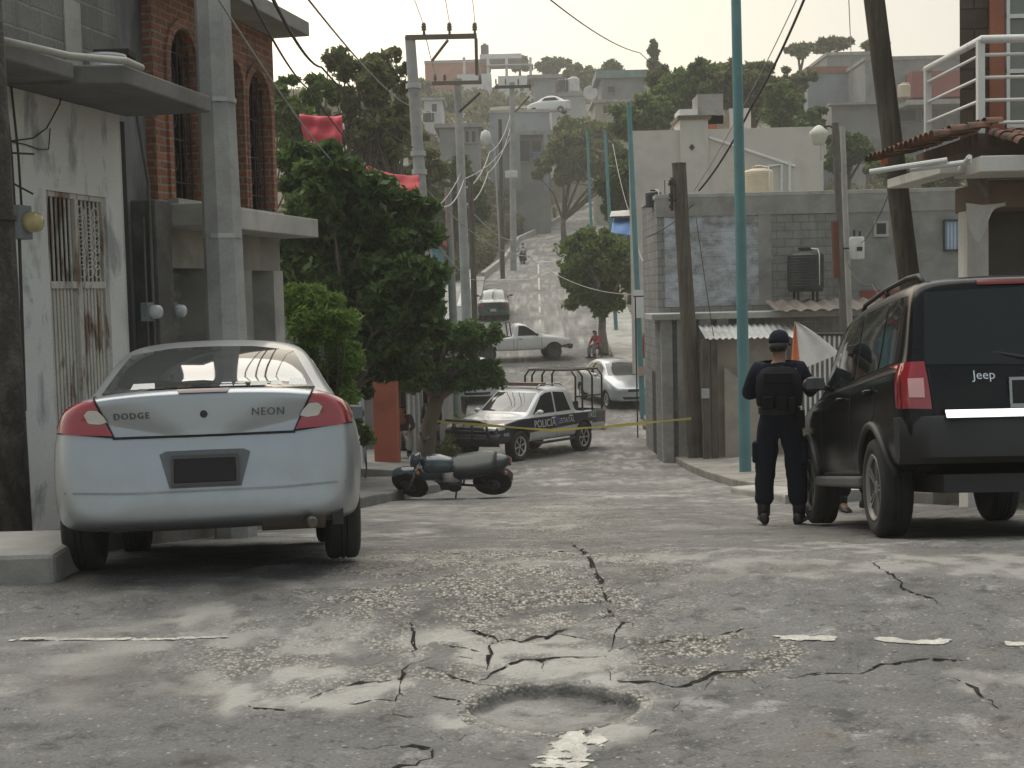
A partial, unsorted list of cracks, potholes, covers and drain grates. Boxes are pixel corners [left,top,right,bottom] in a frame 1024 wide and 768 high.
crack [638,627,756,645]
crack [249,622,624,717]
crack [339,730,466,768]
crack [872,562,937,602]
pothole [457,679,656,737]
crack [608,658,999,709]
